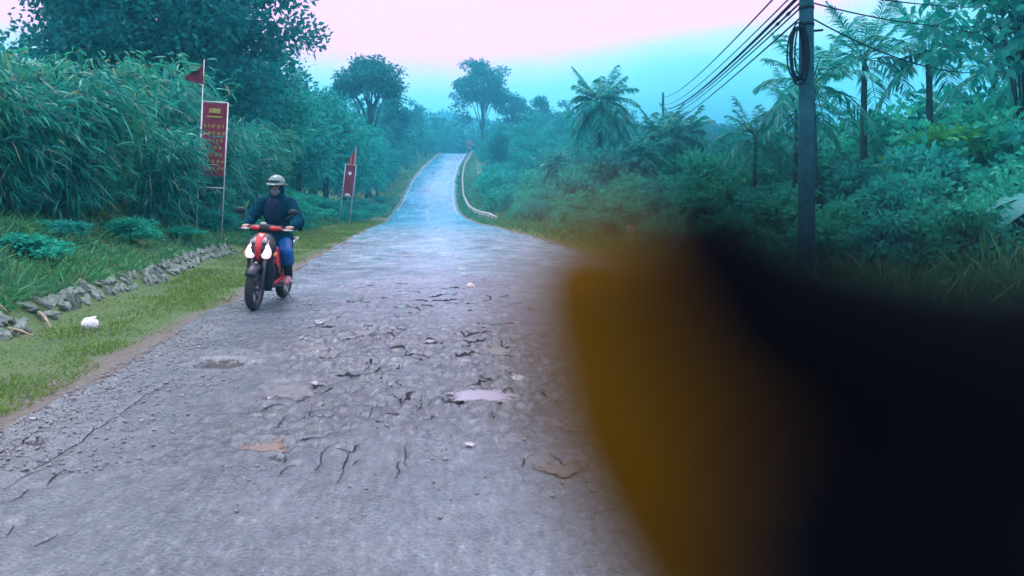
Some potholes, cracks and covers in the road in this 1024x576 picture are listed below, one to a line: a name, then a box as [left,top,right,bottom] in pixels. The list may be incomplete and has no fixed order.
pothole [195,360,257,369]
crack [257,403,359,483]
crack [307,283,516,422]
pothole [446,387,521,405]
crack [3,381,170,501]
